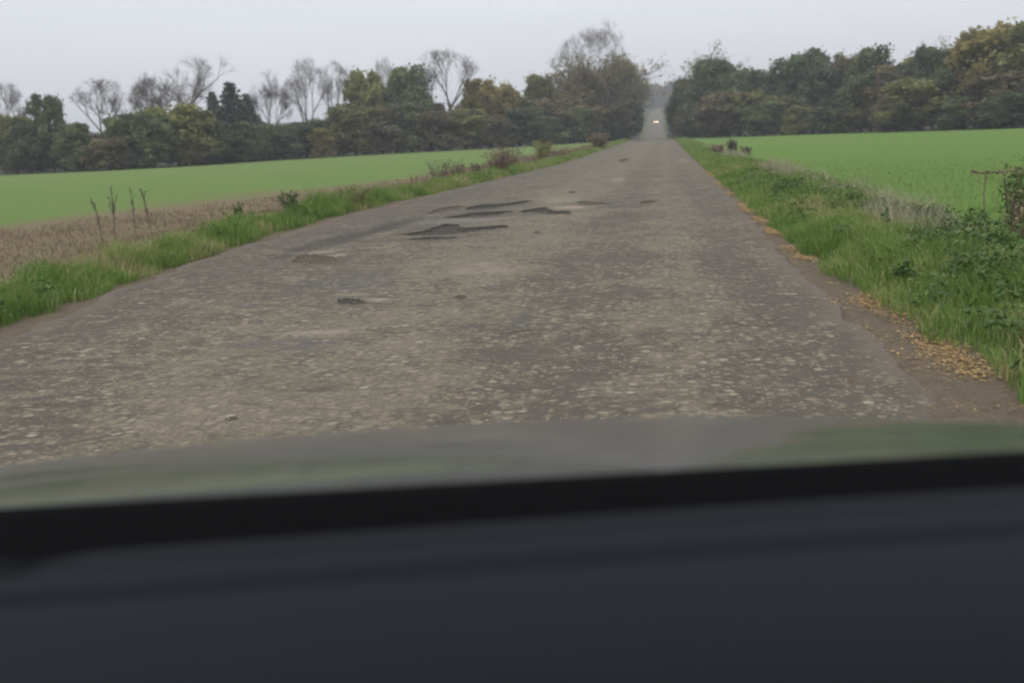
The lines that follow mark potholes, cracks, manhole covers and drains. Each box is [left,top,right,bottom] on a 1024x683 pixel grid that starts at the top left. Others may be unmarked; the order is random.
pothole [422,205,465,214]
pothole [439,210,517,218]
pothole [397,223,512,236]
pothole [327,296,368,306]
pothole [285,253,345,265]
pothole [517,207,574,215]
pothole [463,200,536,210]
